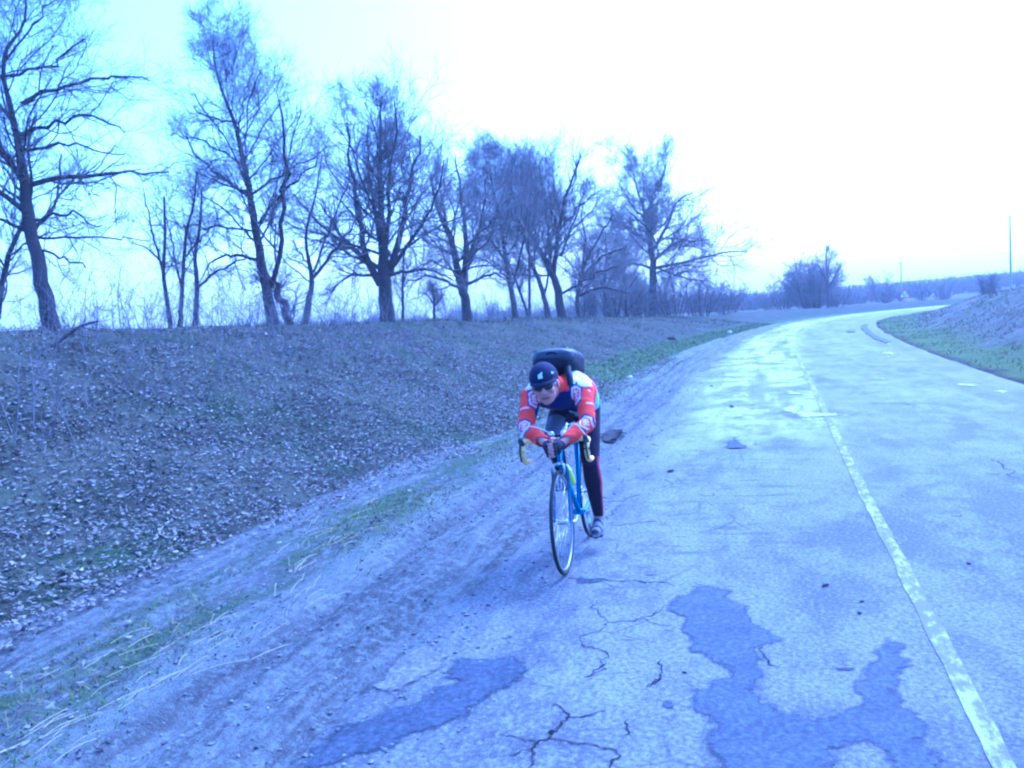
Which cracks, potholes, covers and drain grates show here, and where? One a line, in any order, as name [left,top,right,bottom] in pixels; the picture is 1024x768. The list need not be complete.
crack [501,704,630,768]
crack [579,603,671,678]
crack [647,660,663,687]
